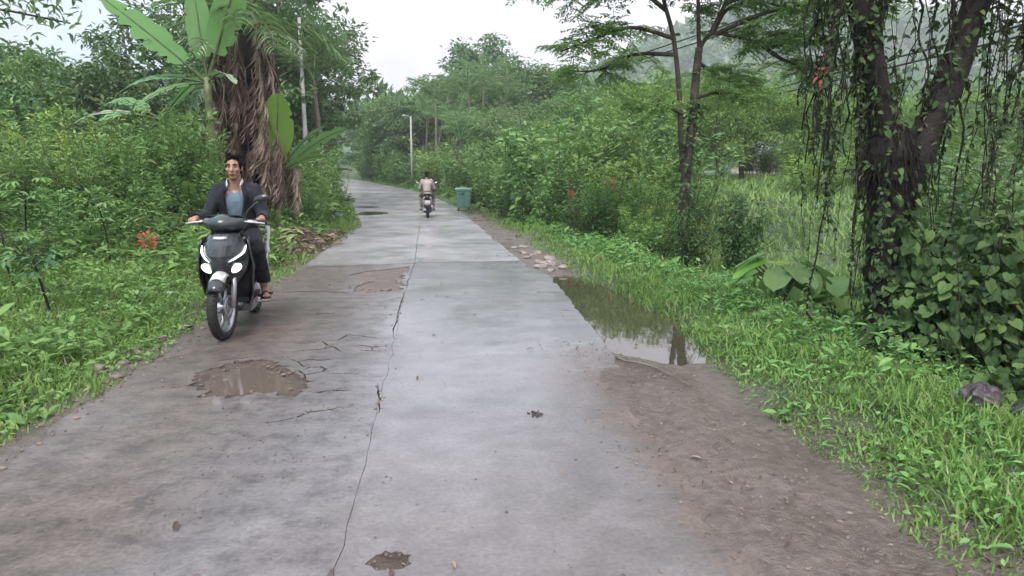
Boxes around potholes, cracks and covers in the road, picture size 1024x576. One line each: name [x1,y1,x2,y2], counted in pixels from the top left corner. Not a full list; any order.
pothole [364,551,412,571]
pothole [350,266,410,293]
pothole [187,359,313,398]
crack [265,289,404,424]
